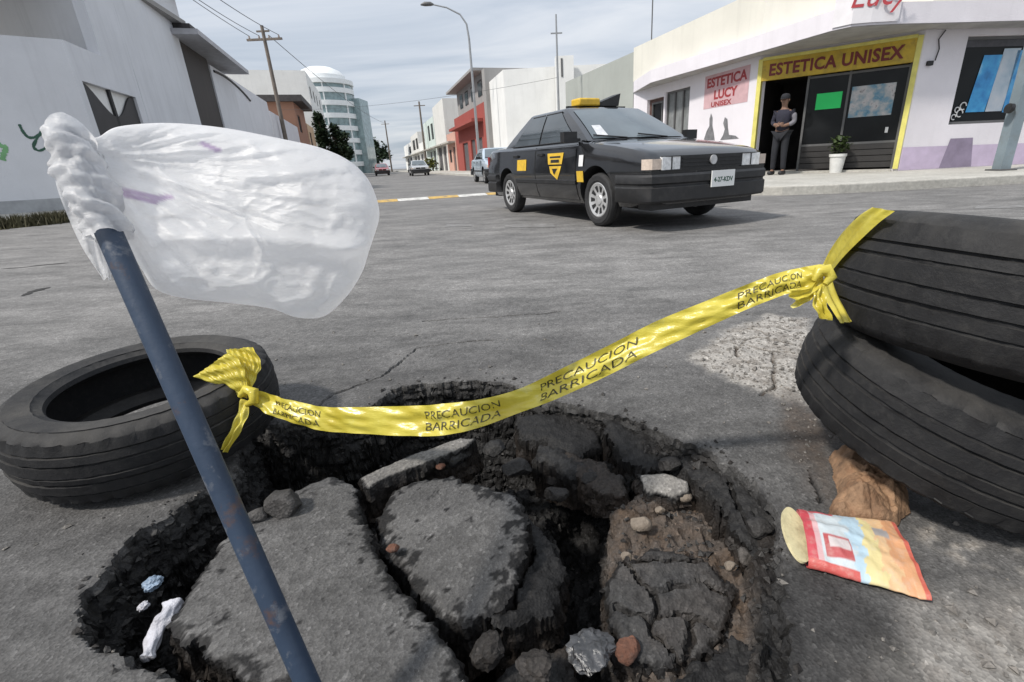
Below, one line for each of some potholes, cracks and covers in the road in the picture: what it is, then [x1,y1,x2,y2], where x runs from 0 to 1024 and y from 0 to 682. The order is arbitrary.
crack [719,328,796,396]
crack [806,469,827,504]
pothole [73,380,796,682]
crack [318,339,494,406]
